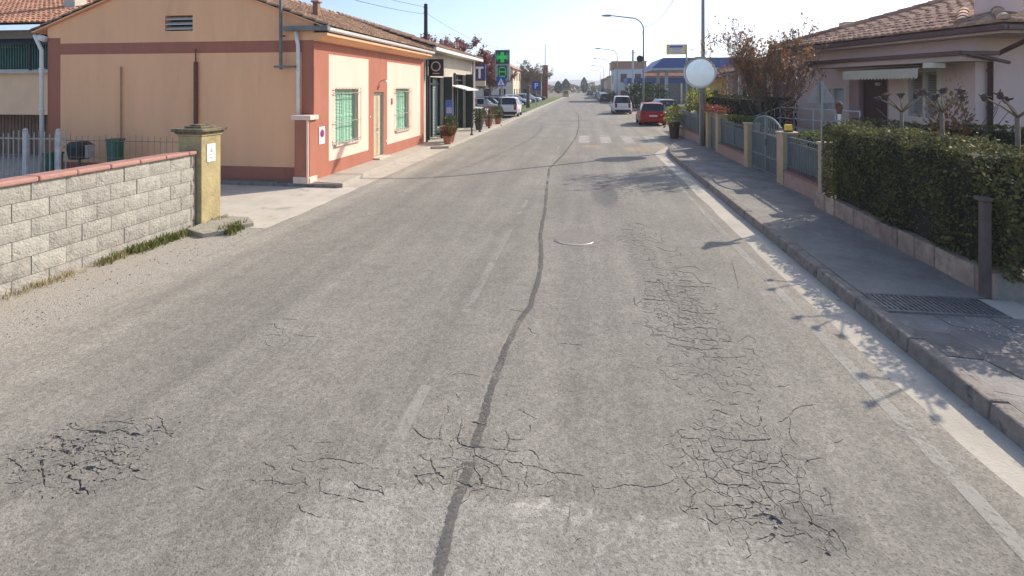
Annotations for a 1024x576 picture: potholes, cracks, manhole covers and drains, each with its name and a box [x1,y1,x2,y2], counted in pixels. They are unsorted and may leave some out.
drain grate [862,292,1013,319]
crack [245,441,384,518]
crack [377,394,849,564]
crack [616,223,767,402]
